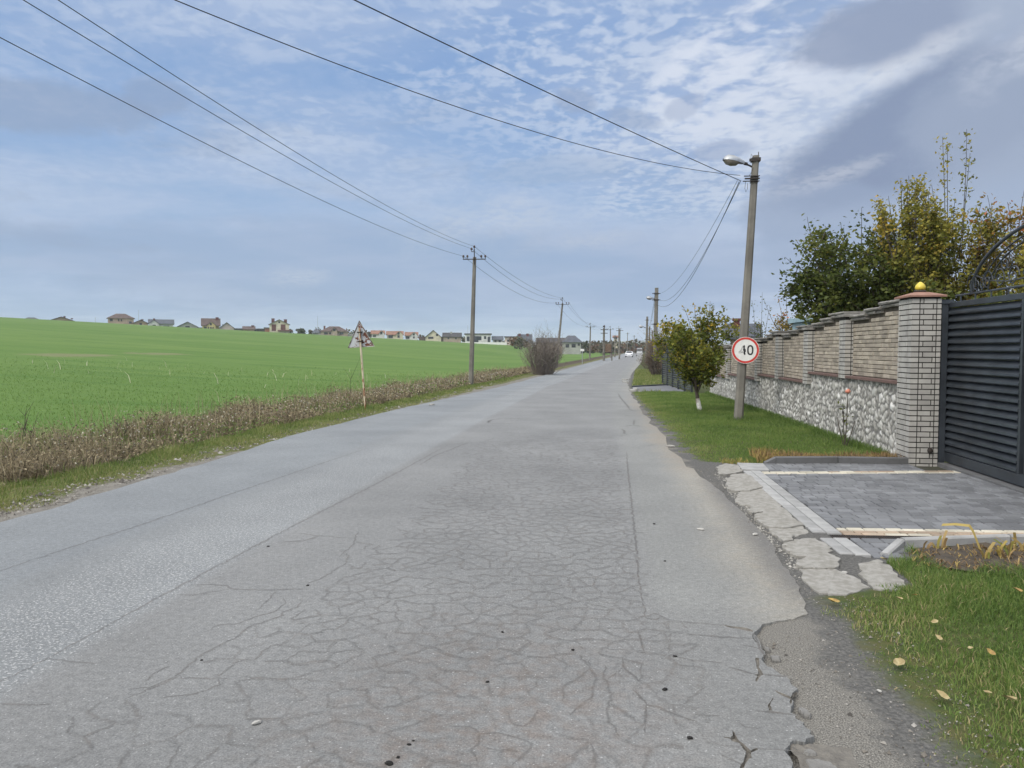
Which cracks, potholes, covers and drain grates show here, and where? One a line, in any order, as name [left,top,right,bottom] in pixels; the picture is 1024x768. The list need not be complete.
crack [2,394,798,768]
pothole [790,744,859,768]
